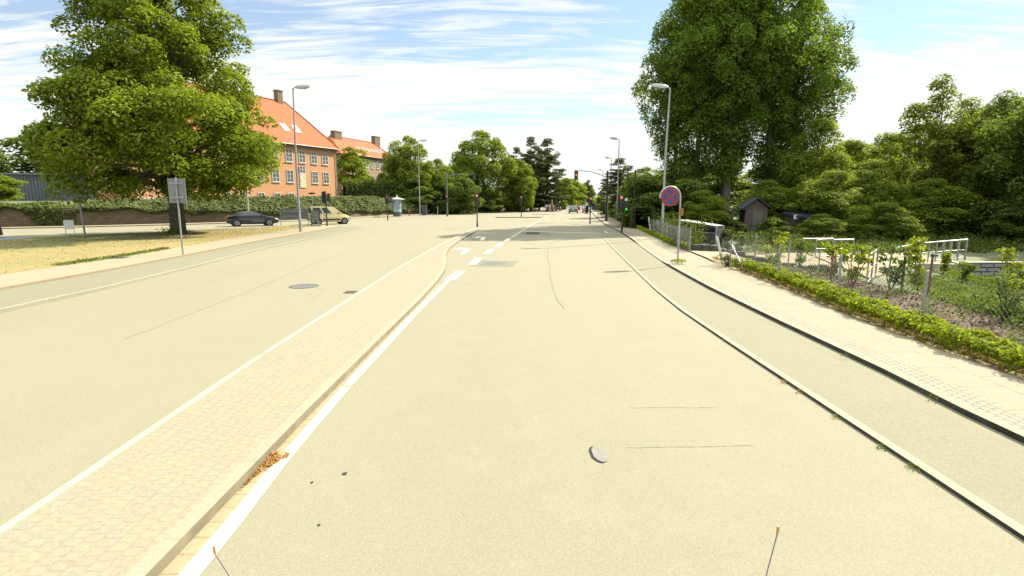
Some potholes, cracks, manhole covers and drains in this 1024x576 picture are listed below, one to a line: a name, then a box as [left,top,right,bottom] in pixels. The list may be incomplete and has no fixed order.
utility cover [589,446,608,463]
crack [547,241,564,308]
